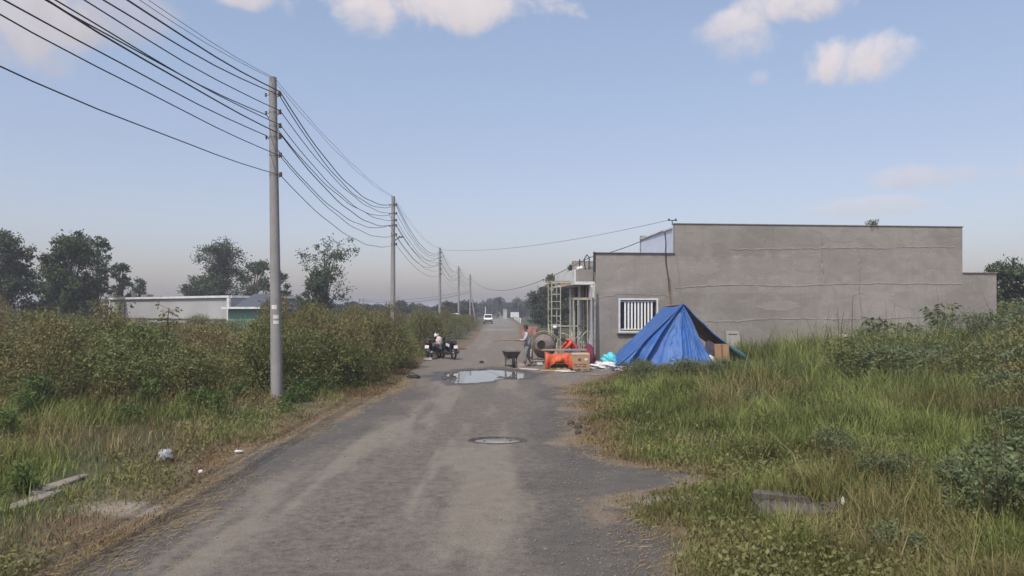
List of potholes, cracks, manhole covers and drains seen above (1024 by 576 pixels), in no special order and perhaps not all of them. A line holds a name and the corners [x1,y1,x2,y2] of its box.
manhole cover [467,436,527,444]
pothole [436,368,536,385]
